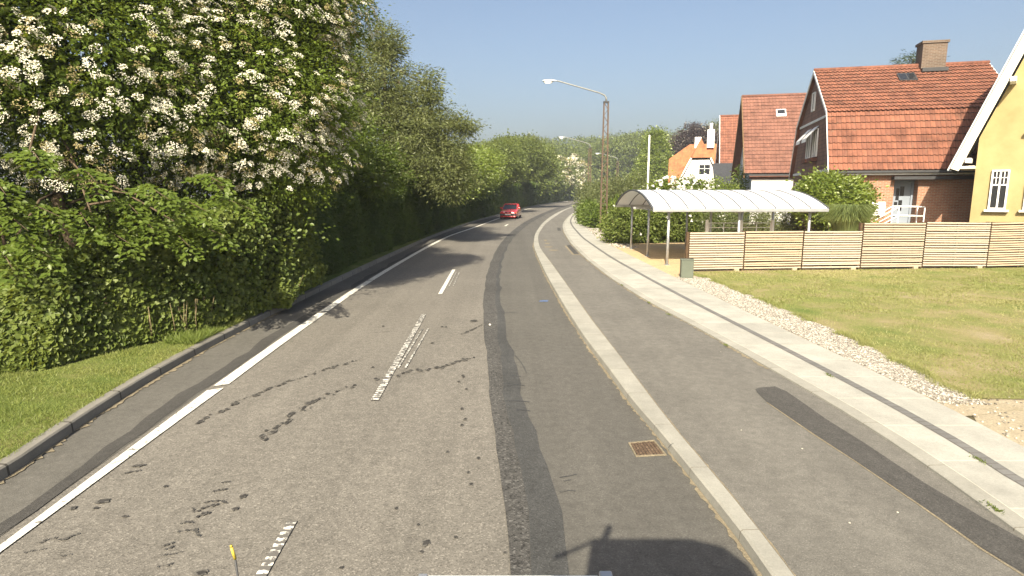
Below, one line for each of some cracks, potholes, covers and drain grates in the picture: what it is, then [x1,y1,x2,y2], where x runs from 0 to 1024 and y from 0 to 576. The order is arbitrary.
crack [24,532,80,557]
drain grate [628,440,667,457]
